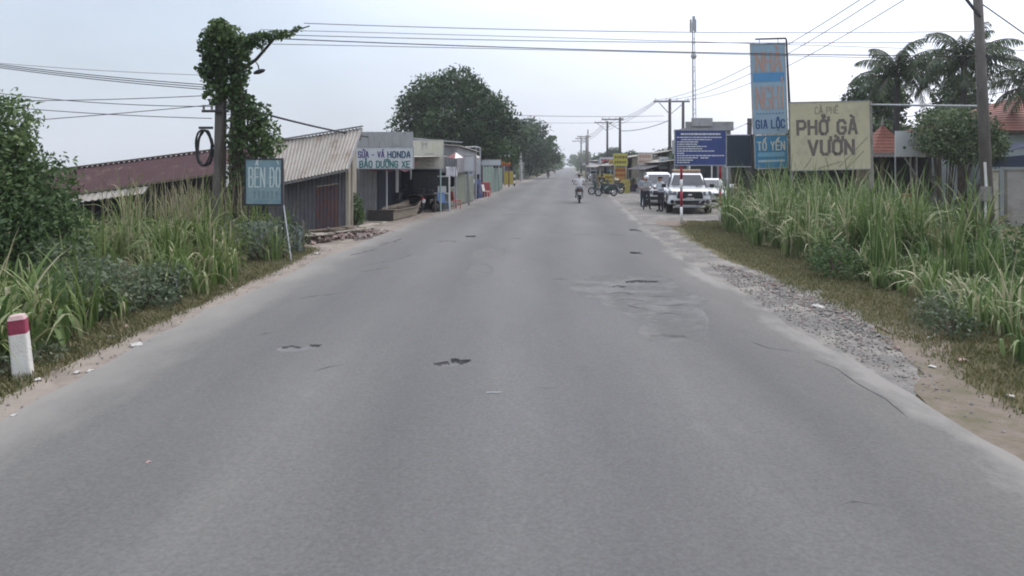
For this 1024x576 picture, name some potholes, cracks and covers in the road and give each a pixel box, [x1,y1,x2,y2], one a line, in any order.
pothole [432,358,471,366]
